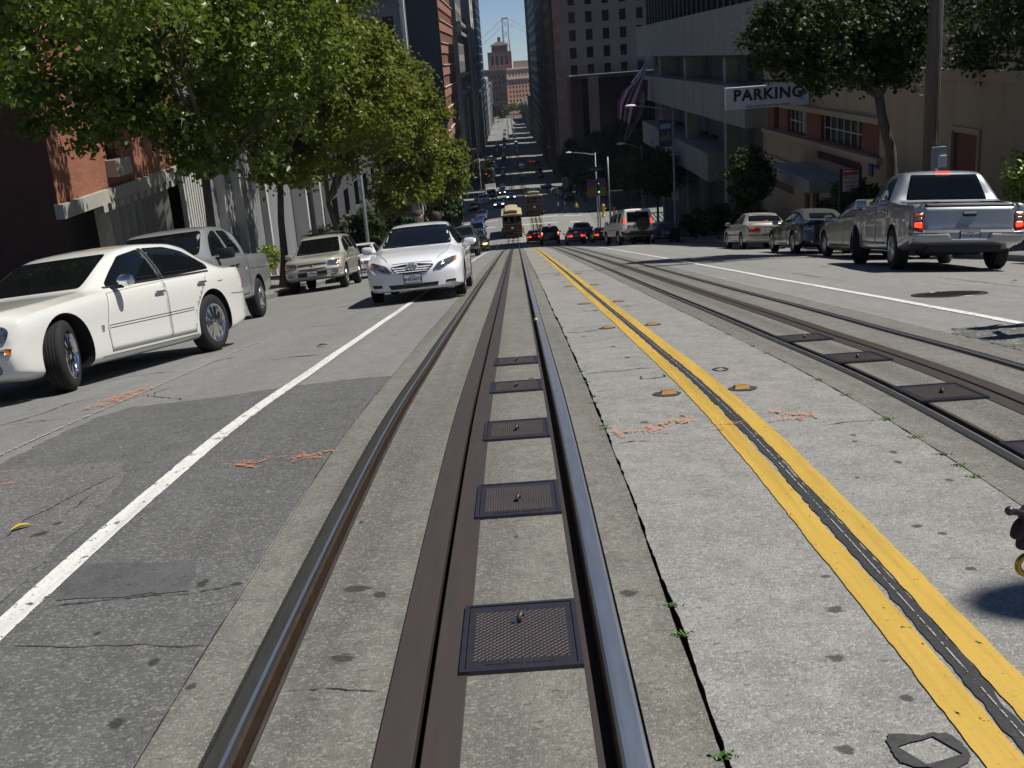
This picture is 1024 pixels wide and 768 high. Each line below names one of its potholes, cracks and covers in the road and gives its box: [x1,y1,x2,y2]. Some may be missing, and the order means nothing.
manhole cover [475,479,562,520]
manhole cover [820,351,893,365]
manhole cover [494,355,539,367]
manhole cover [490,379,543,394]
manhole cover [483,417,551,442]
manhole cover [892,382,990,404]
manhole cover [459,598,584,676]
